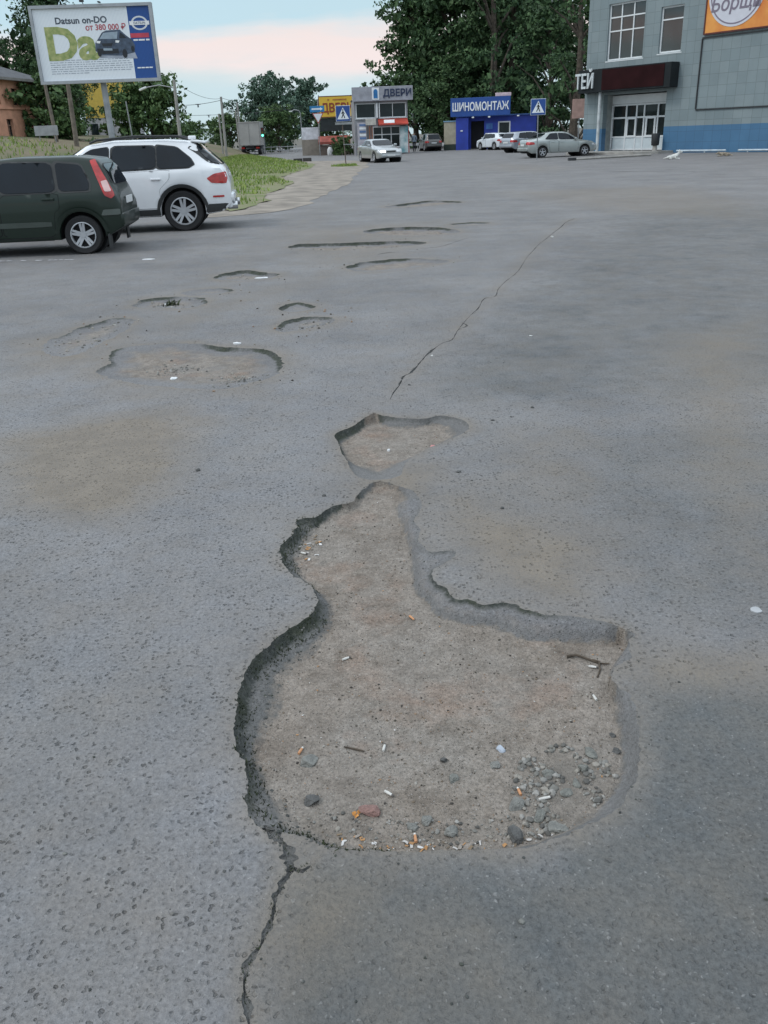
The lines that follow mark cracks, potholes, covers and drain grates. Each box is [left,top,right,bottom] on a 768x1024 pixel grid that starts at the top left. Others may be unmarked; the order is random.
pothole [278,302,316,312]
pothole [233,481,642,853]
pothole [363,227,461,236]
pothole [95,343,285,389]
pothole [335,413,469,480]
crack [241,825,311,1024]
pothole [275,317,335,332]
pothole [345,258,449,272]
pothole [288,241,426,250]
pothole [214,270,280,281]
pothole [42,318,137,357]
pothole [132,297,208,309]
